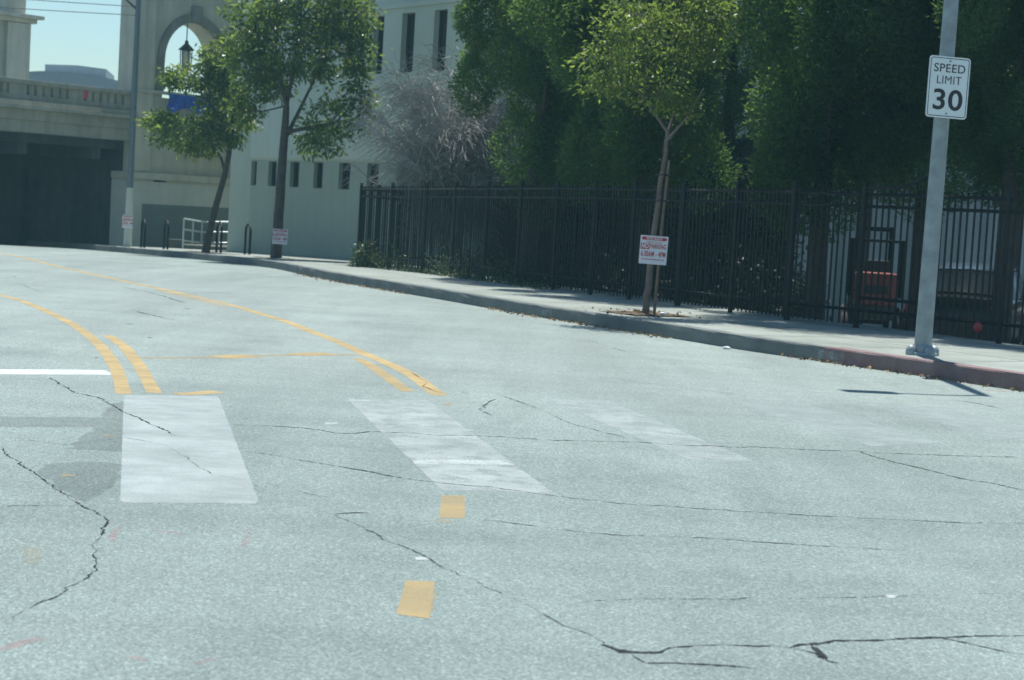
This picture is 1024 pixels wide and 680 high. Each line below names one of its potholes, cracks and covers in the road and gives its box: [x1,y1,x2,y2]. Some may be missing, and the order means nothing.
crack [248,451,1013,523]
crack [335,512,1024,668]
crack [2,378,210,618]
crack [230,393,1022,490]
